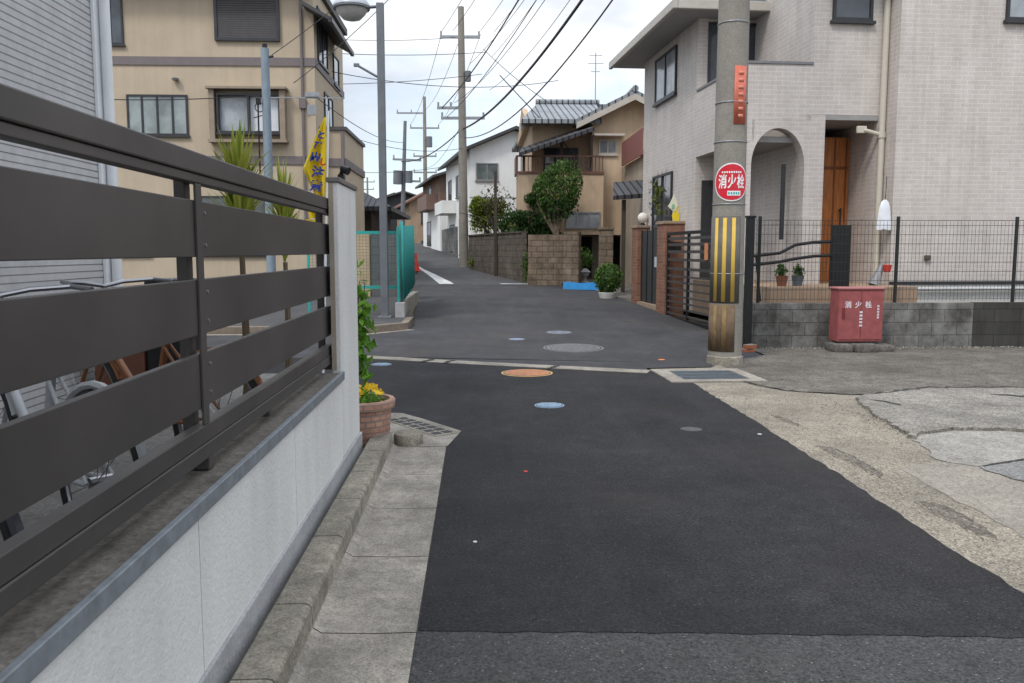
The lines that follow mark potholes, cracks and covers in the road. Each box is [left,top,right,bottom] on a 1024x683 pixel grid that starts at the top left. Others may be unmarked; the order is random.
manhole cover [501,369,553,377]
drain grate [390,416,460,437]
crack [869,386,1024,405]
drain grate [650,368,768,383]
manhole cover [543,344,604,352]
